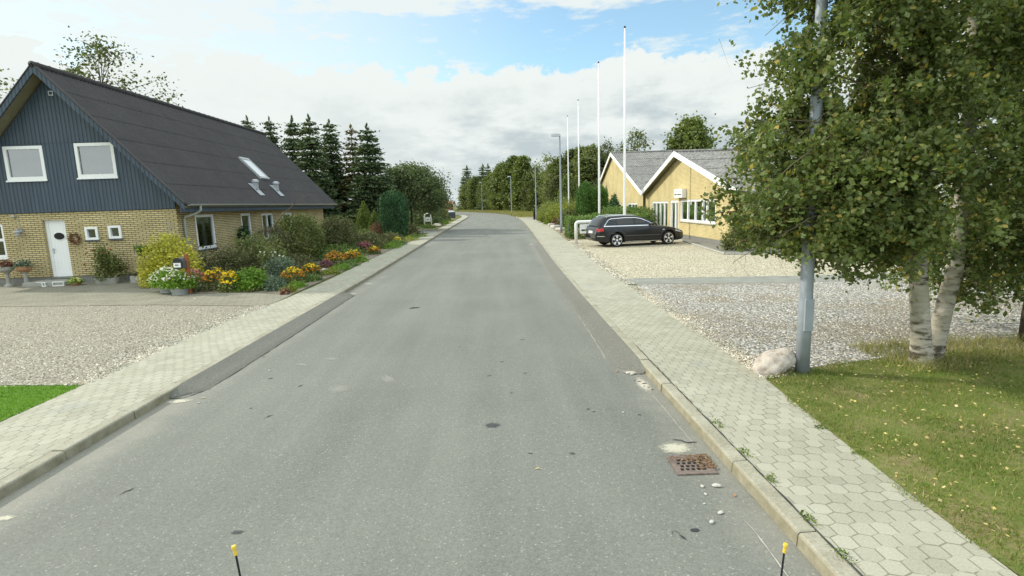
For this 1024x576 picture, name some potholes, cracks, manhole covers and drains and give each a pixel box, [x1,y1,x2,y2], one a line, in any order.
drain grate [666,453,718,476]
